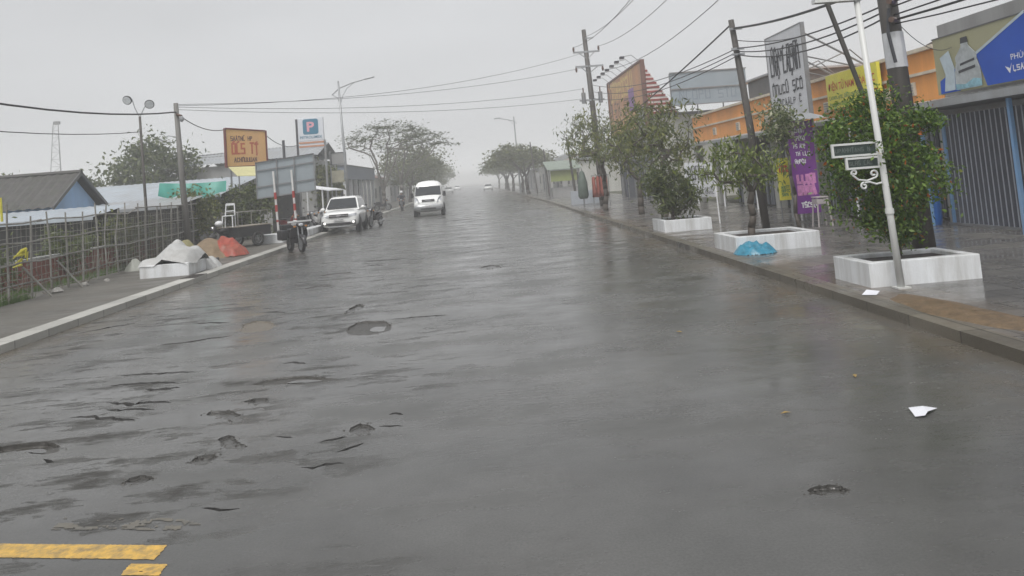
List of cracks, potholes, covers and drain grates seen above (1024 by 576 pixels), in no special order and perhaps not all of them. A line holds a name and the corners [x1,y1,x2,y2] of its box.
crack [72,371,193,421]
pothole [121,475,157,486]
pothole [218,435,248,449]
pothole [347,320,392,335]
pothole [803,483,851,496]
pothole [343,422,375,436]
crack [301,412,403,470]
pothole [201,410,243,424]
pothole [187,453,222,465]
pothole [0,441,60,455]
pothole [241,397,268,405]
